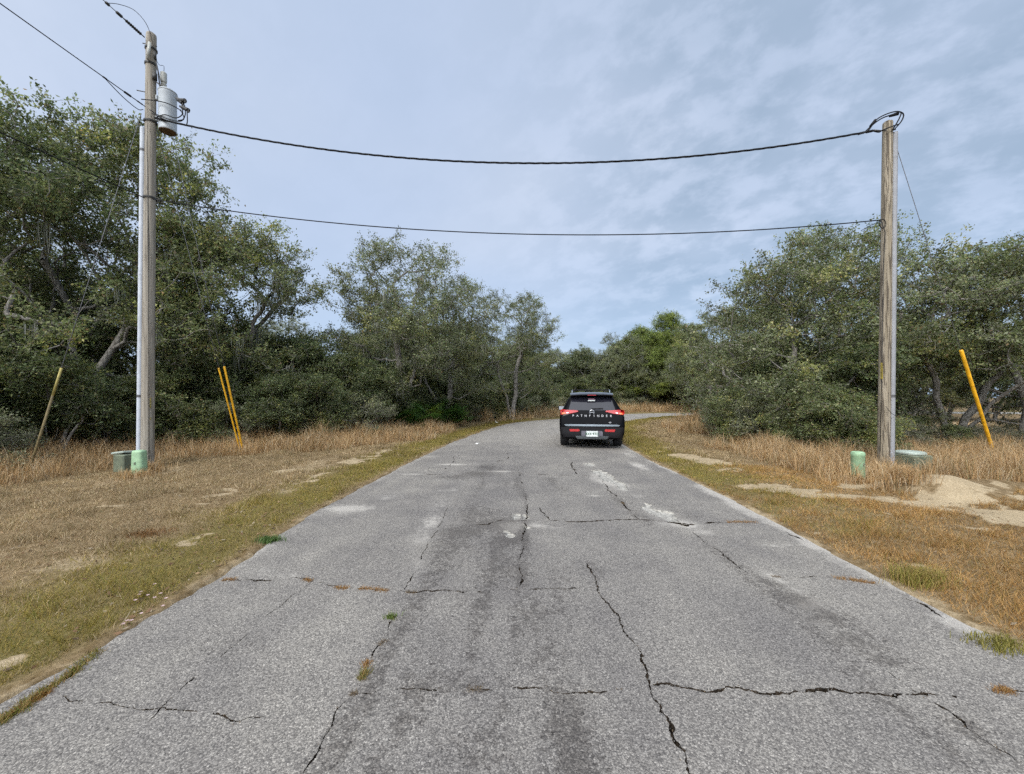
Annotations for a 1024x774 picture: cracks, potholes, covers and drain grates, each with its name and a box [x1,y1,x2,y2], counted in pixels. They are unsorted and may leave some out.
crack [0,507,1023,774]
crack [427,457,760,526]
